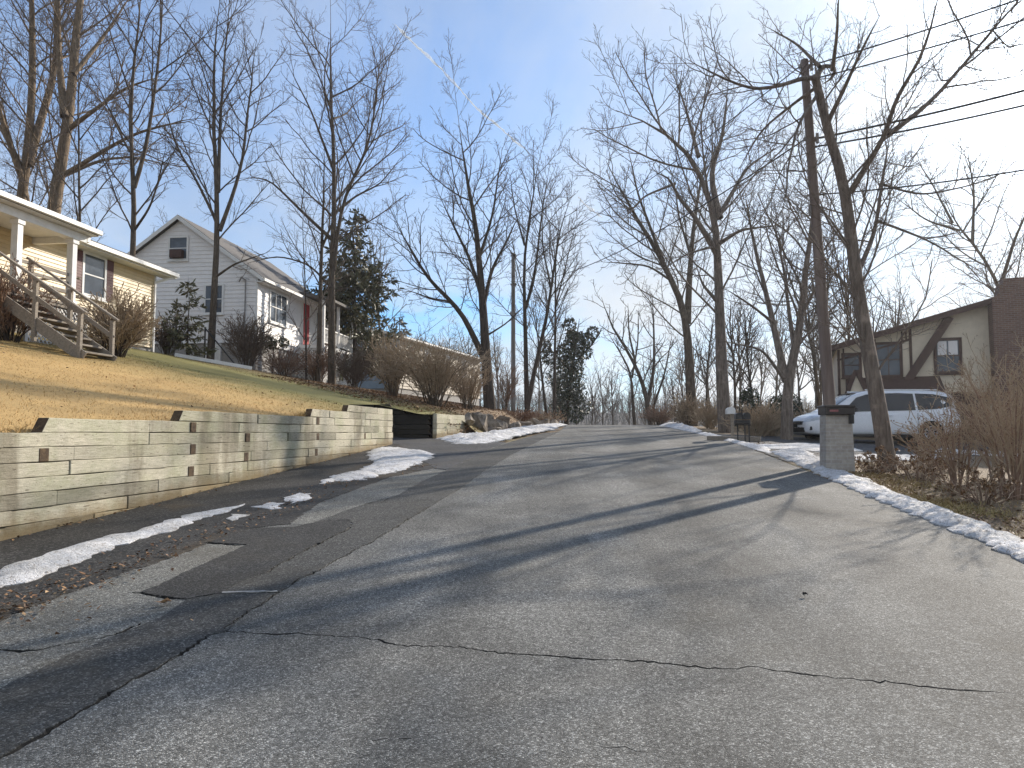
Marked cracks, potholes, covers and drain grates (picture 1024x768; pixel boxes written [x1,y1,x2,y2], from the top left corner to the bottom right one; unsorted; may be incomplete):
crack [226,631,1016,694]
crack [2,622,142,653]
